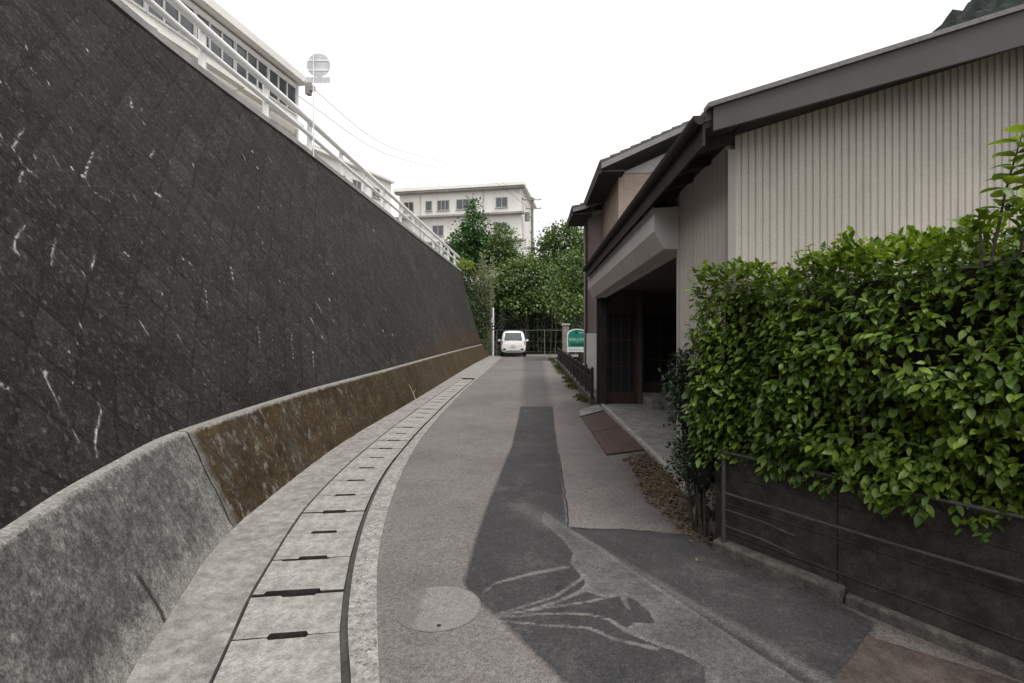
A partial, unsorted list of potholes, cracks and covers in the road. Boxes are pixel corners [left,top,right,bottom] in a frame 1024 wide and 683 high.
manhole cover [394,586,481,632]
